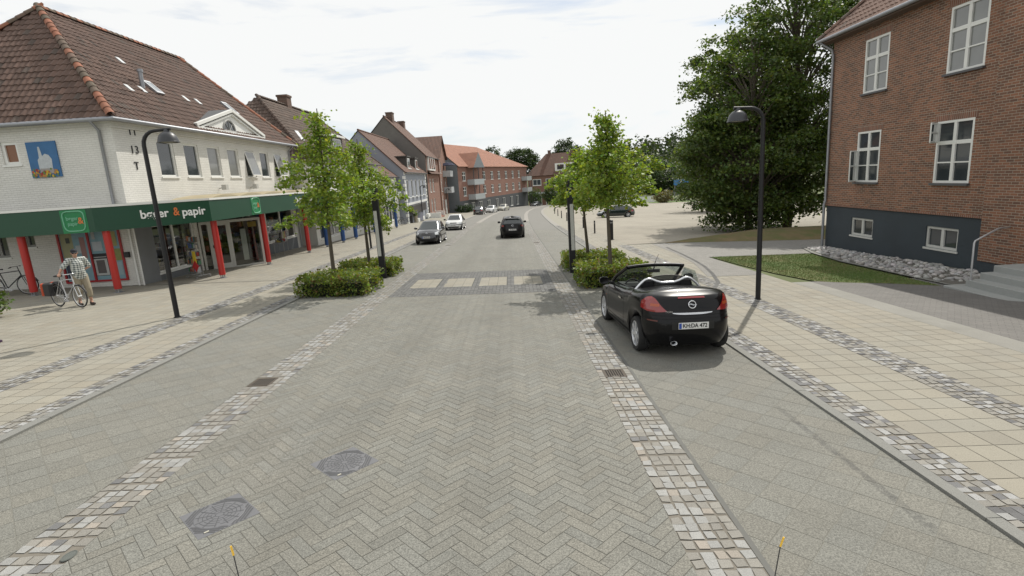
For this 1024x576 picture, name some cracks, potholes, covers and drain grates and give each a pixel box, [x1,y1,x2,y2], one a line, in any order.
drain grate [247,378,278,387]
utility cover [60,550,78,562]
manhole cover [310,447,379,480]
drain grate [602,369,628,378]
manhole cover [179,493,260,540]
